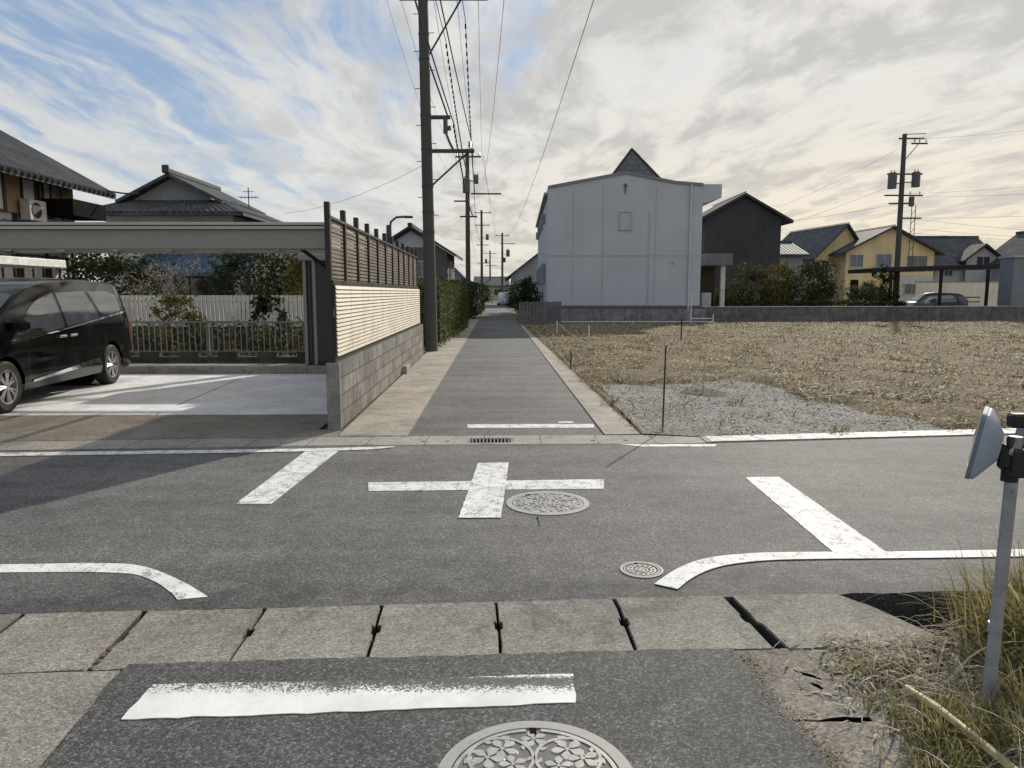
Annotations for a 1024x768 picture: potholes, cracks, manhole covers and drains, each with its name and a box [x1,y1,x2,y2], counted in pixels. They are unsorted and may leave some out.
manhole cover [438,721,632,768]
manhole cover [506,491,589,516]
crack [794,670,823,690]
manhole cover [620,561,664,578]
